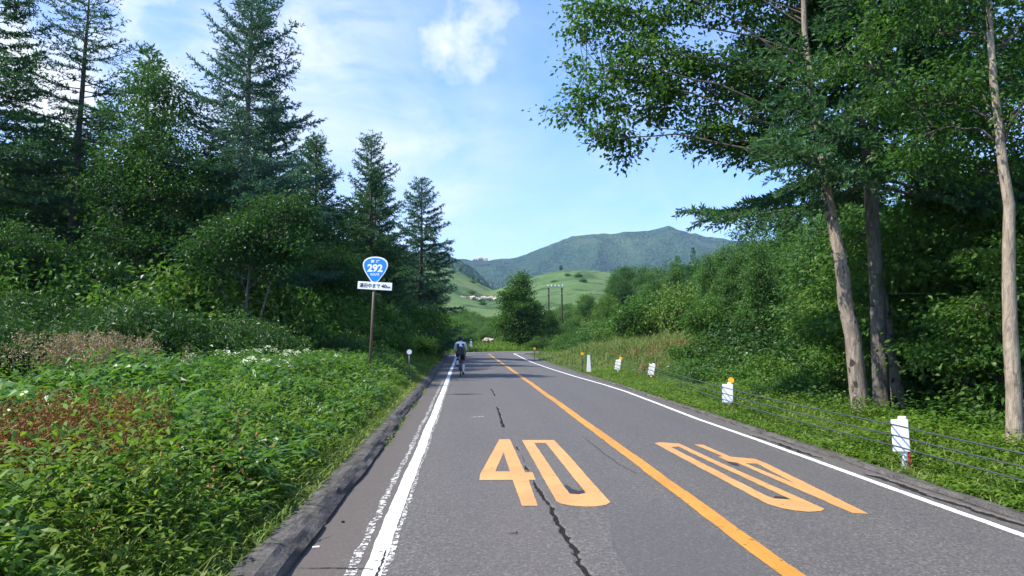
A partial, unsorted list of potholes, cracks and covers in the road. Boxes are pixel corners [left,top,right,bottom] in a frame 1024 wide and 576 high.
crack [517,447,592,576]
